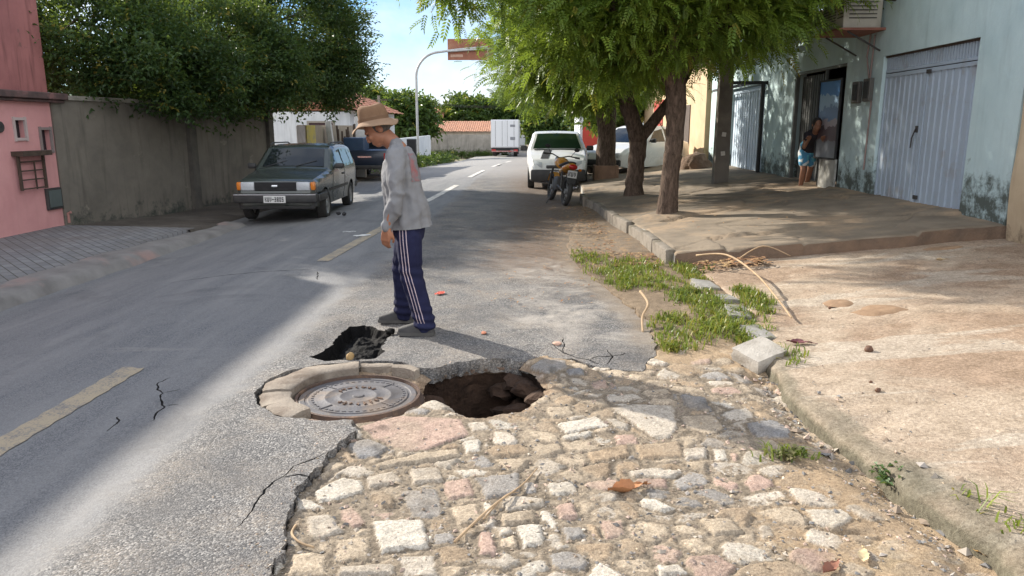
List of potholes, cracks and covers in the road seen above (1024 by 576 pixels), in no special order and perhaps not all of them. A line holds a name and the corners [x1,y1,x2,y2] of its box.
pothole [310,325,393,361]
pothole [420,370,546,418]
crack [152,378,180,421]
crack [235,451,329,528]
manhole cover [259,361,436,424]
crack [552,339,625,366]
